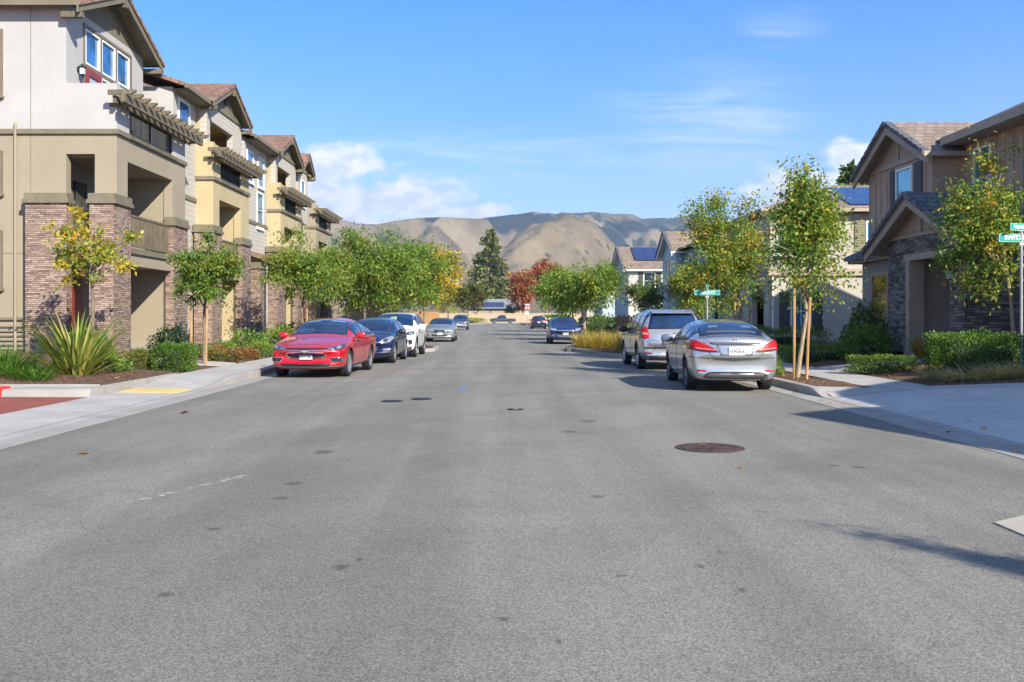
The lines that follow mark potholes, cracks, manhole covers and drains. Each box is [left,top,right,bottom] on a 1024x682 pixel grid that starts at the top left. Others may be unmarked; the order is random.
manhole cover [675,443,745,453]
